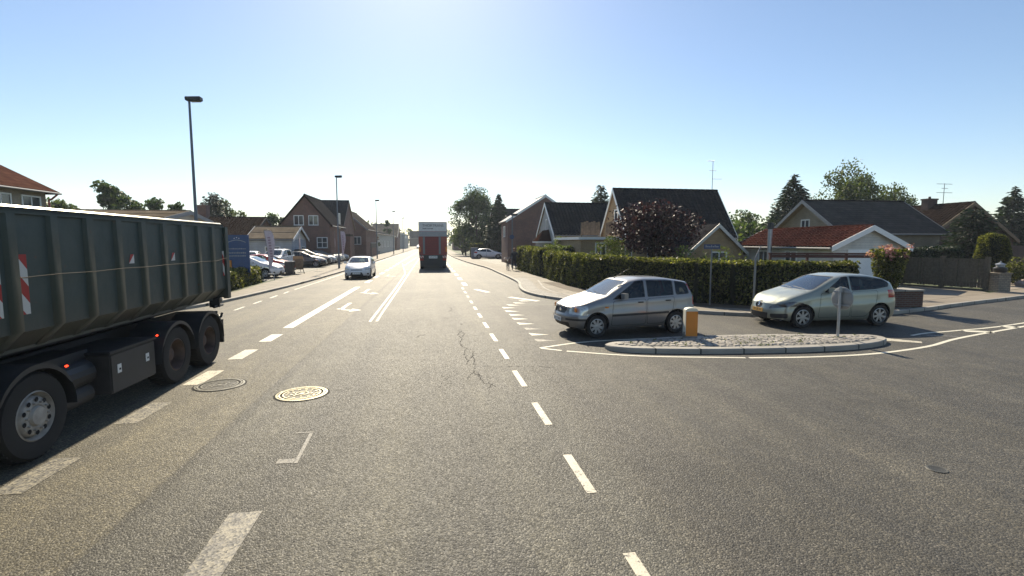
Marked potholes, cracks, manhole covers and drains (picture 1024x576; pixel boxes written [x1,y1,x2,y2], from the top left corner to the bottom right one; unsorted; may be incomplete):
manhole cover [191,378,247,392]
crack [436,333,552,392]
manhole cover [273,386,330,402]
